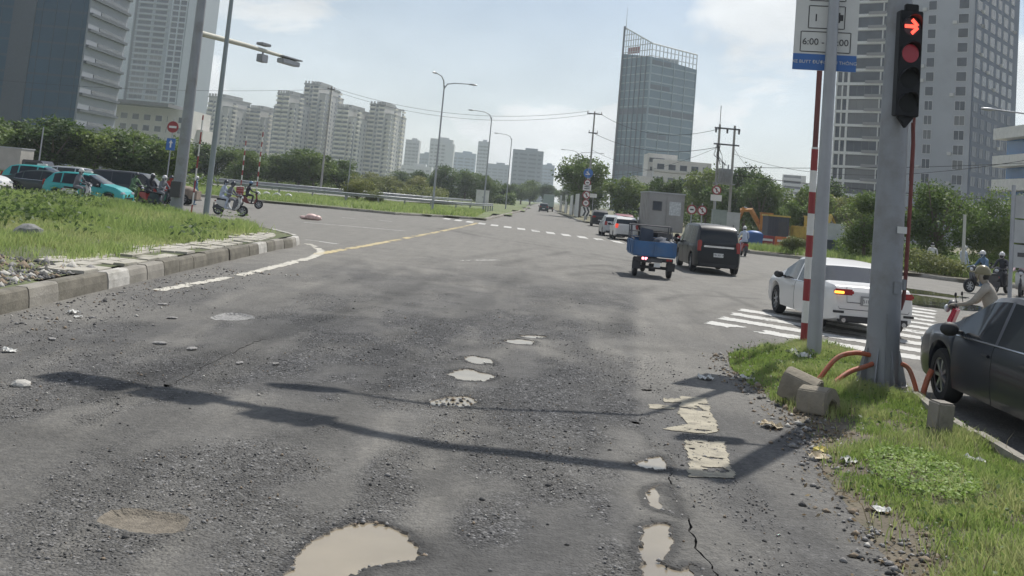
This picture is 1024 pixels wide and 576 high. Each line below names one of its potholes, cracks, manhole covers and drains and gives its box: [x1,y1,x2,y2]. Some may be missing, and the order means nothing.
crack [163,339,269,387]
pothole [424,394,484,409]
pothole [627,454,676,474]
pothole [636,482,690,520]
pothole [627,520,717,576]
pothole [459,355,498,365]
pothole [271,517,432,576]
pothole [440,368,501,382]
